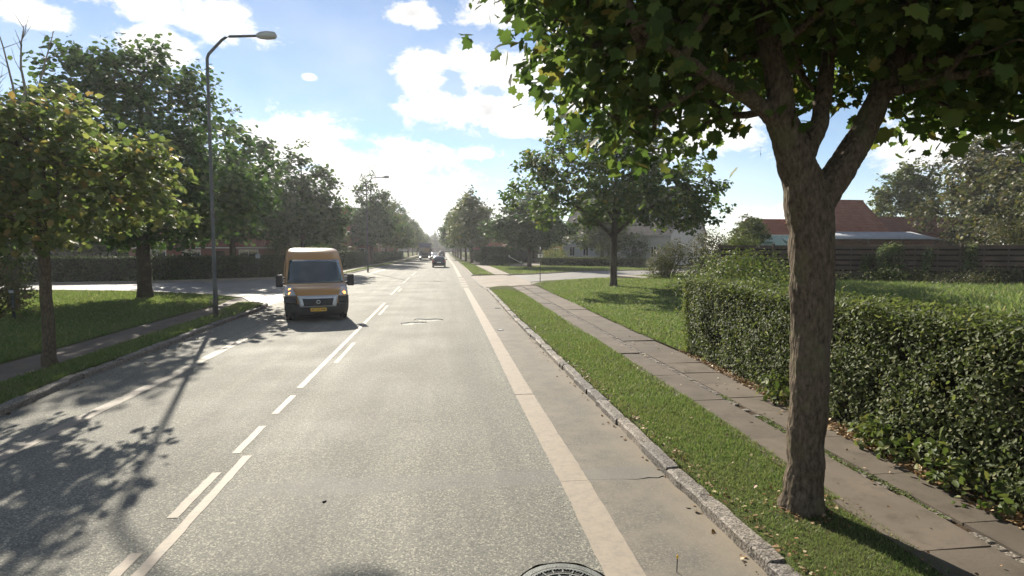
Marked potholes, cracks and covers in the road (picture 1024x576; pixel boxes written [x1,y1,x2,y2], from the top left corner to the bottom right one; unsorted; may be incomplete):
manhole cover [522,563,602,576]
